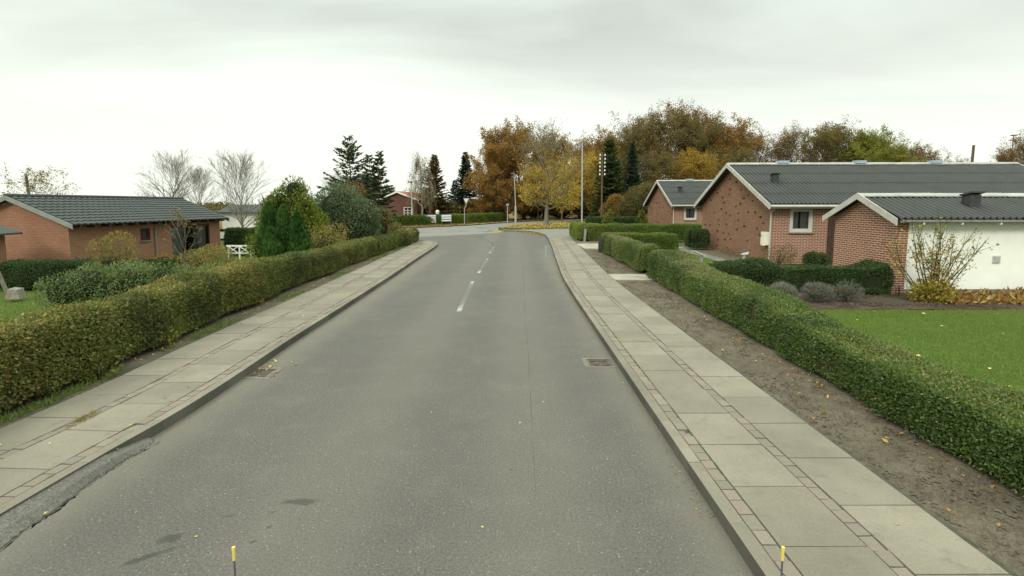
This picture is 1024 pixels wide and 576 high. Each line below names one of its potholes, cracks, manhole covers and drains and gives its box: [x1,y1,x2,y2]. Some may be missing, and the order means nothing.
drain grate [581,358,619,368]
drain grate [242,367,284,379]
